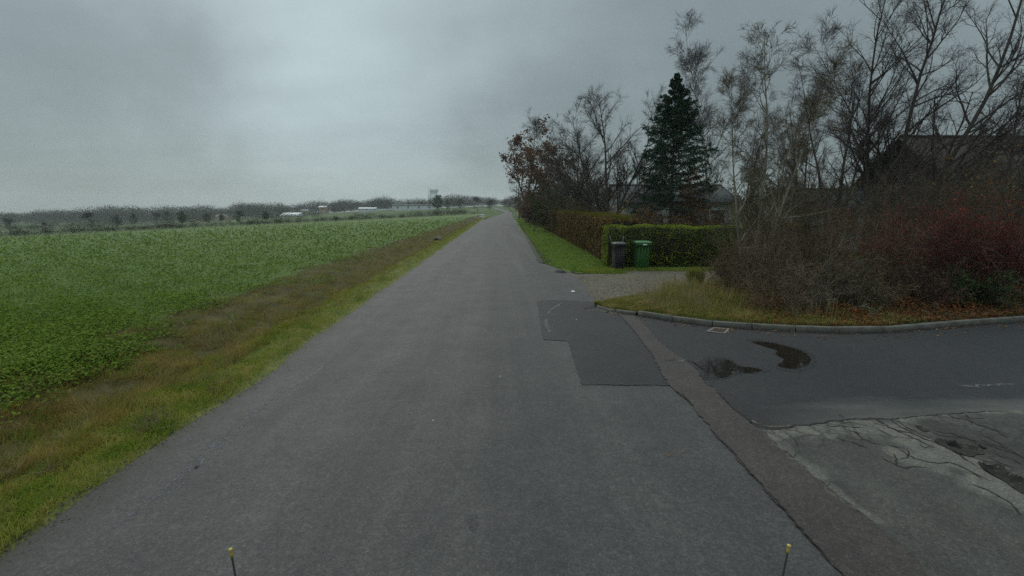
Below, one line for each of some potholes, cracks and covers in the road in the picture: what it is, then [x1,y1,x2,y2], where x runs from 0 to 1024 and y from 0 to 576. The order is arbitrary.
crack [673,359,1023,566]
